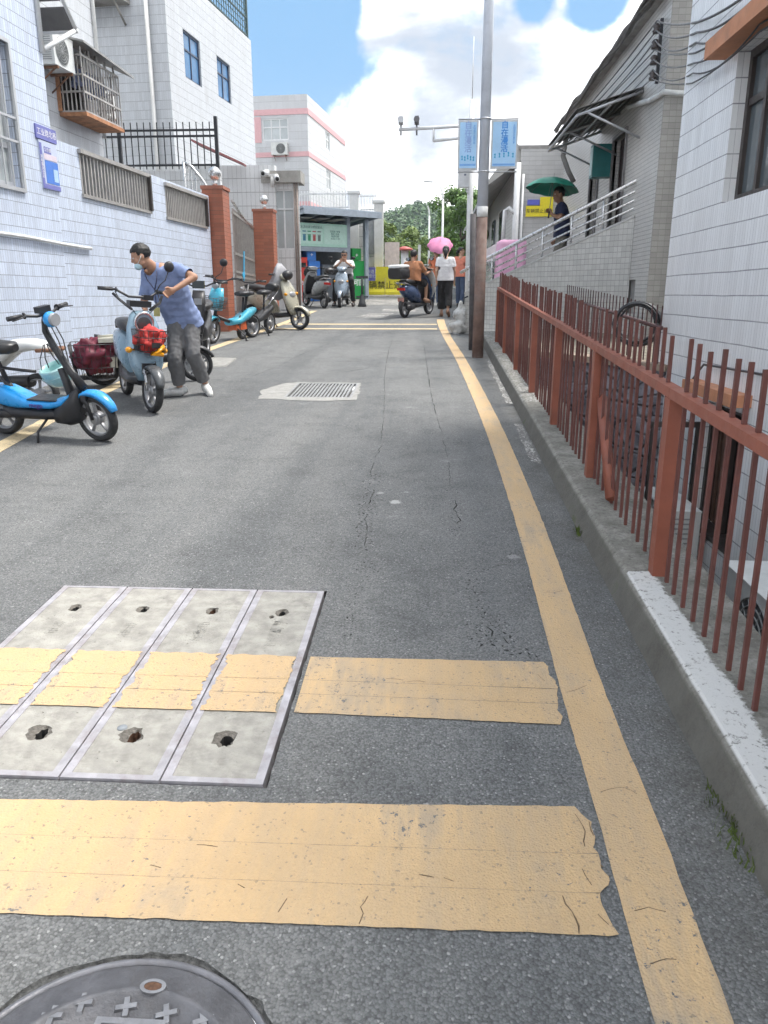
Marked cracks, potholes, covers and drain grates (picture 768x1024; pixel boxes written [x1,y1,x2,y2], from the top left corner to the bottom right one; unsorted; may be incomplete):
drain grate [284,383,359,398]
manhole cover [0,958,266,1024]
crack [465,552,538,658]
